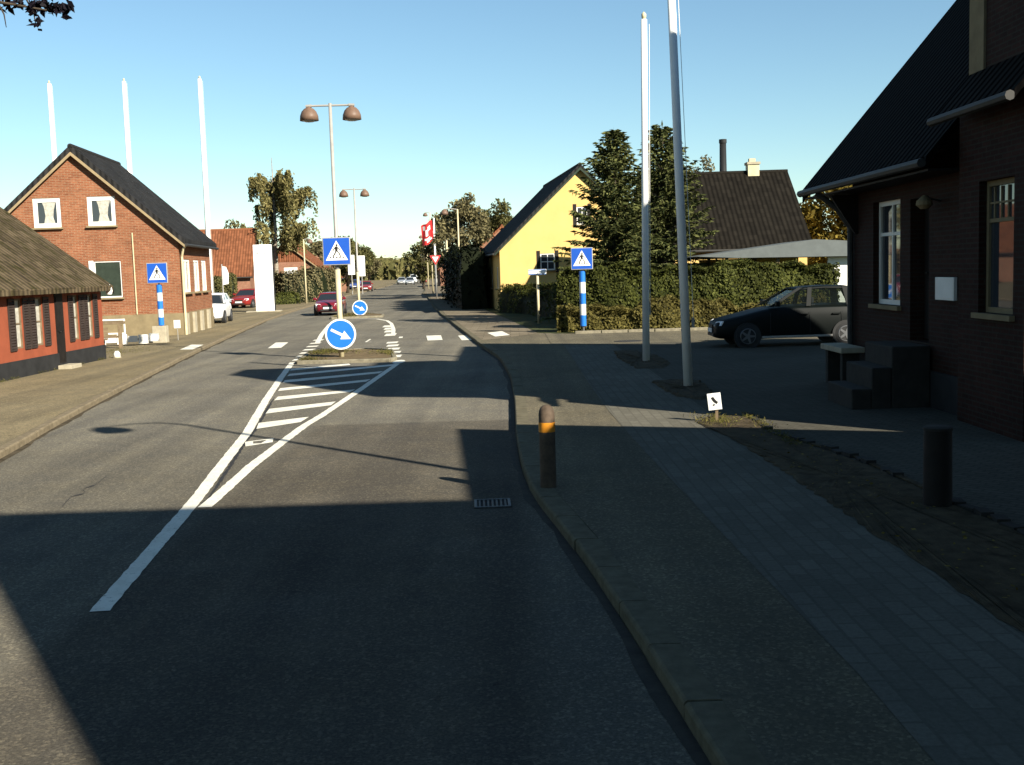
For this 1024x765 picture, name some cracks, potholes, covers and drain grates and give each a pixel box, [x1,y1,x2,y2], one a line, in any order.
drain grate [474,498,512,509]
